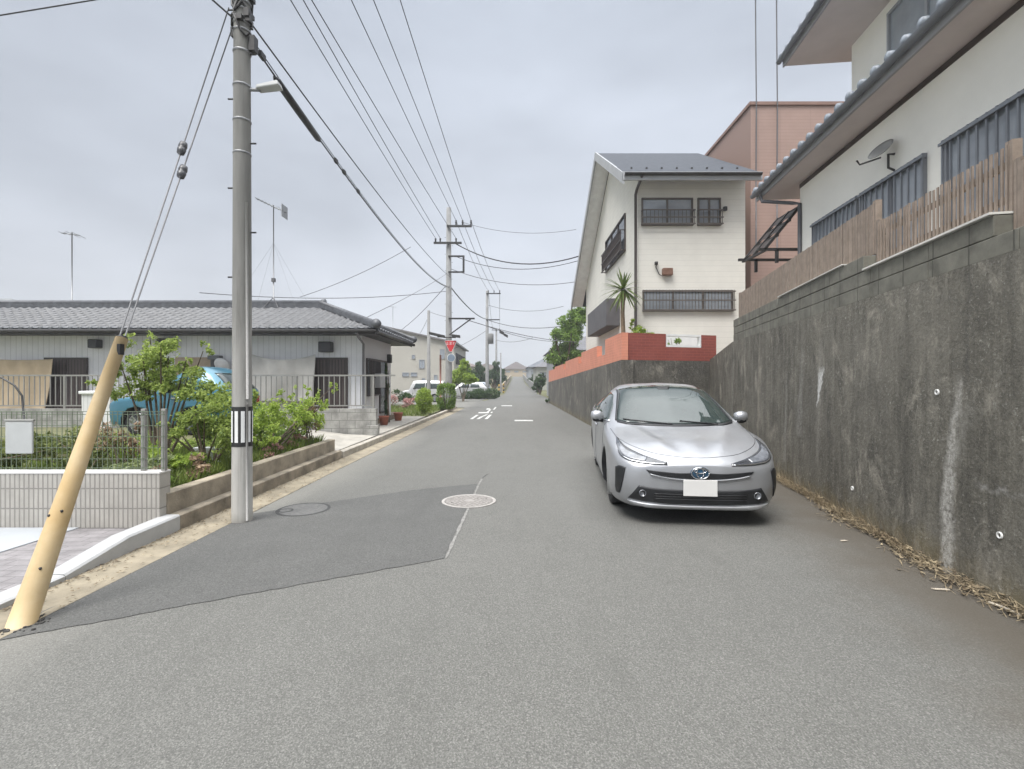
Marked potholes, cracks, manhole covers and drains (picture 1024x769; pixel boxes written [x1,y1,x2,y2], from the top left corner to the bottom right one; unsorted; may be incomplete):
manhole cover [442,494,496,508]
manhole cover [275,503,331,516]
